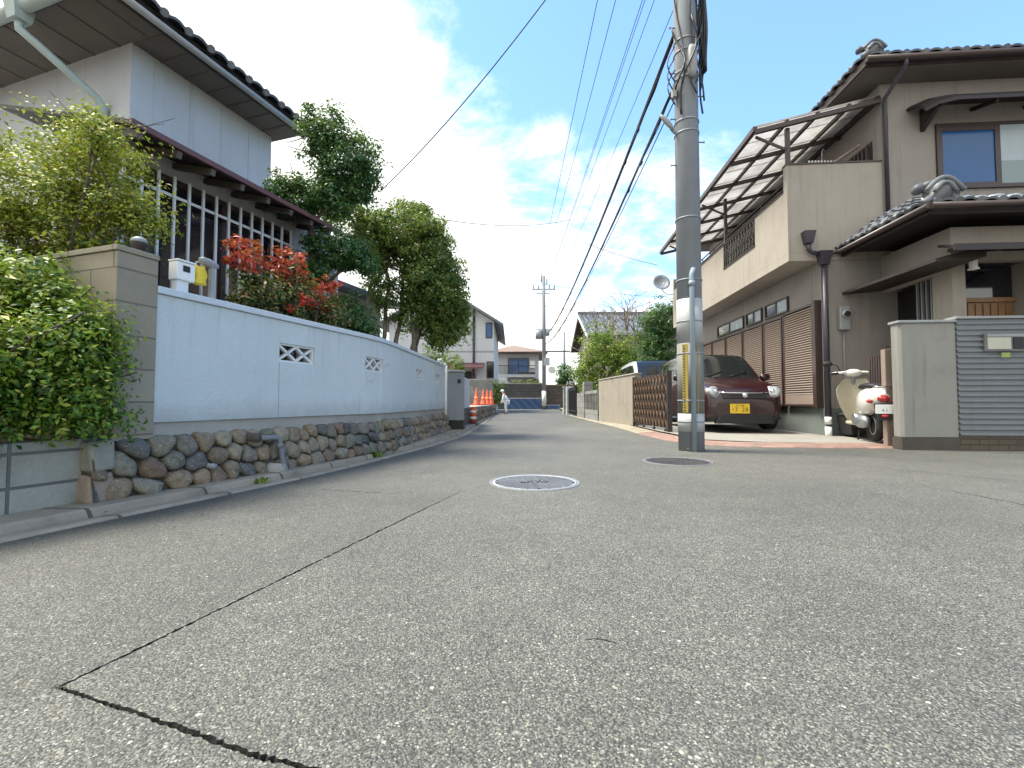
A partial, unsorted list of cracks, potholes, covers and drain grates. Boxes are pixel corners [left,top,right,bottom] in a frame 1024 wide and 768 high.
manhole cover [489,474,581,491]
manhole cover [642,457,714,466]
